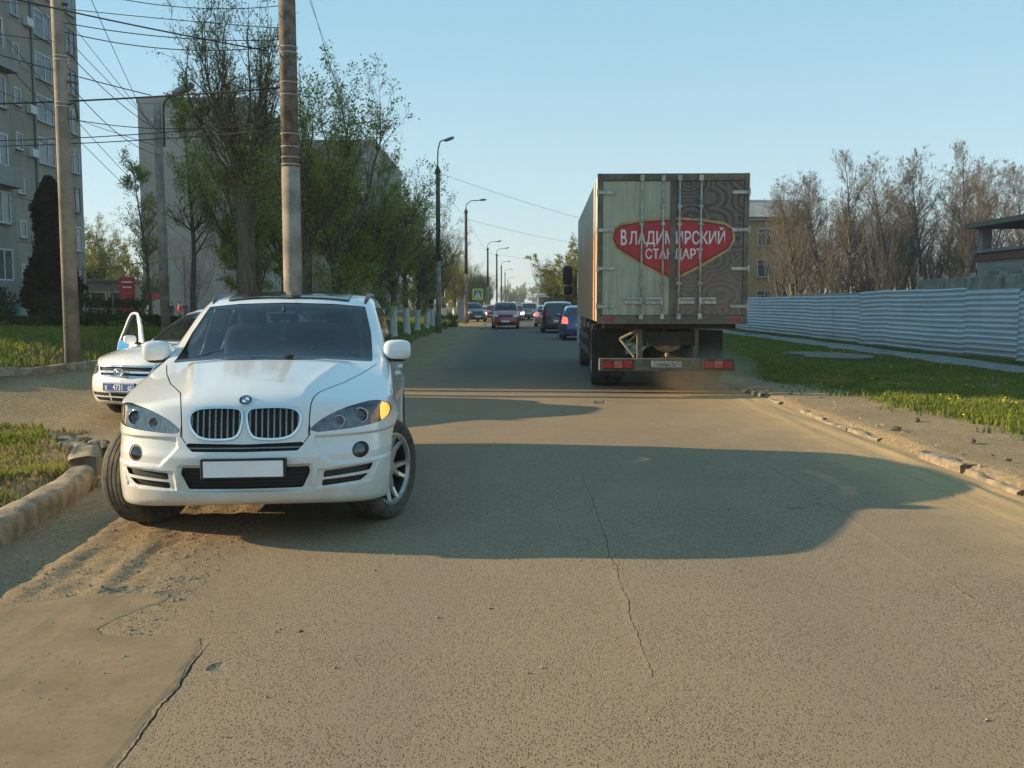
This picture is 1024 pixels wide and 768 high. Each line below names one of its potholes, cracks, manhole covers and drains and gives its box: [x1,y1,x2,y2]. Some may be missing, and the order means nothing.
crack [576,467,662,677]
